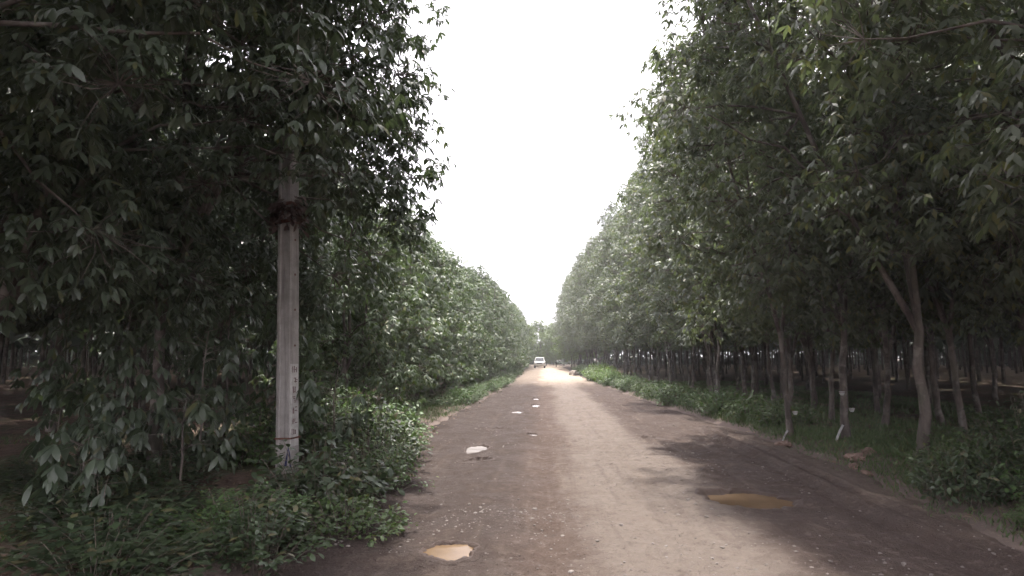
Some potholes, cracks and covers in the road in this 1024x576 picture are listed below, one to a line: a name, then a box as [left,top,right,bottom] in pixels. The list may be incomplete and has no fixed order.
pothole [684,486,815,513]
pothole [409,537,488,566]
pothole [460,443,495,455]
